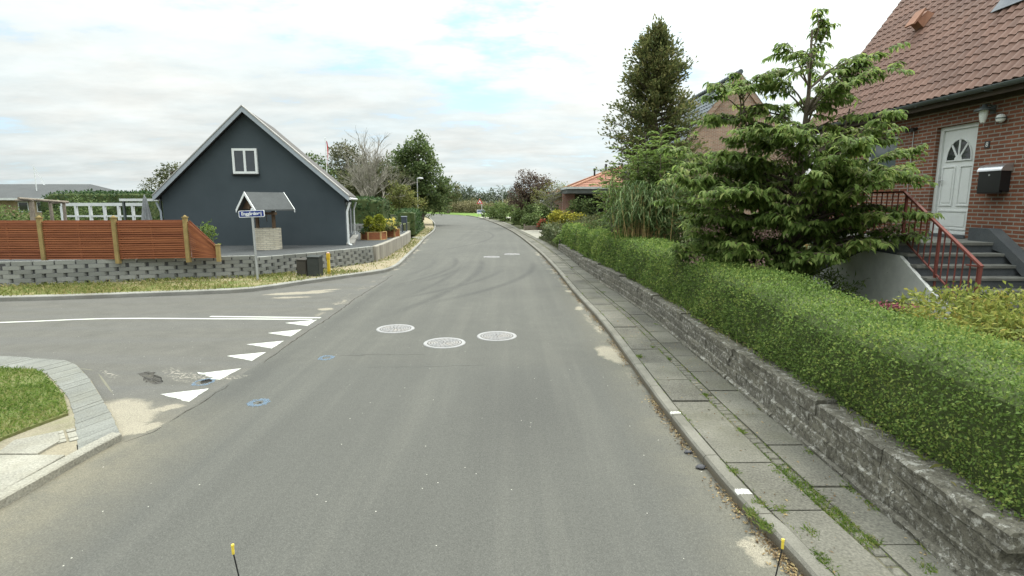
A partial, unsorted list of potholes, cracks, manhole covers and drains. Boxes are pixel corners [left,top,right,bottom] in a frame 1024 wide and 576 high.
manhole cover [477,331,517,341]
manhole cover [376,324,415,333]
pothole [138,371,163,384]
manhole cover [423,337,466,349]
